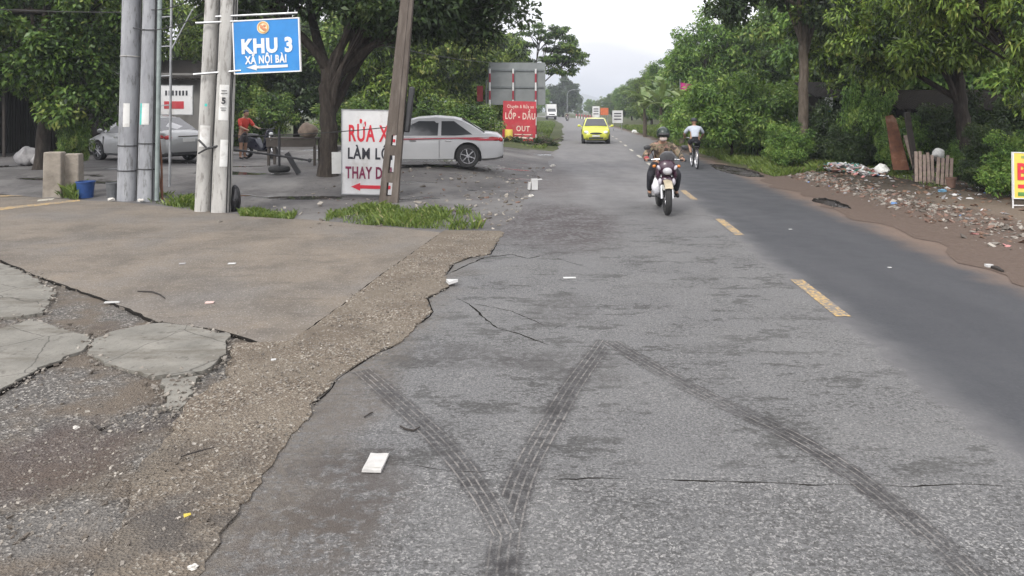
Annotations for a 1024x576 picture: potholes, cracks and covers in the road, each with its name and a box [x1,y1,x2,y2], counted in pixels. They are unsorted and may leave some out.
crack [314,243,585,405]
crack [555,477,997,487]
pothole [812,197,851,209]
crack [0,260,257,342]
pothole [710,164,765,177]
crack [0,362,62,396]
